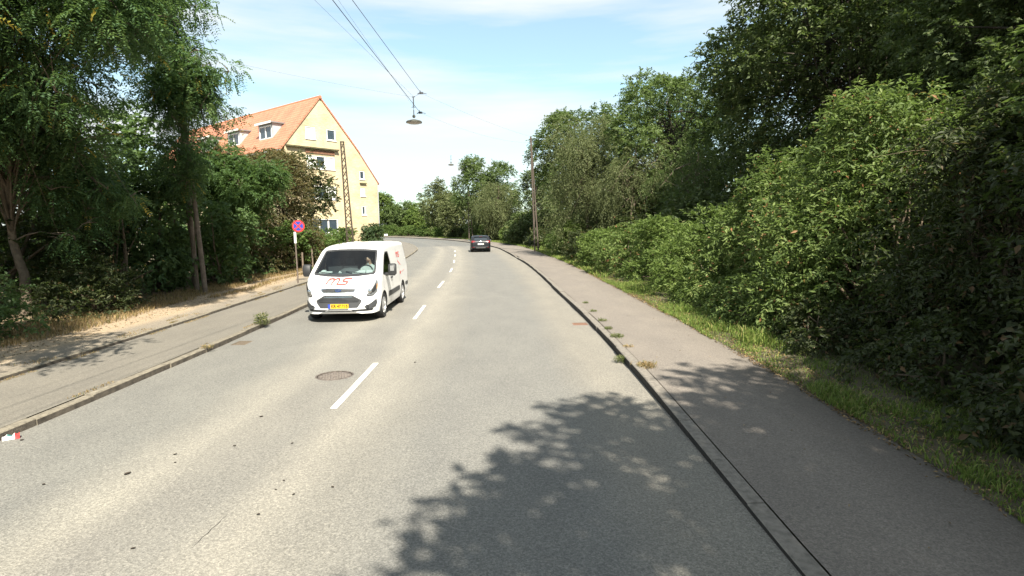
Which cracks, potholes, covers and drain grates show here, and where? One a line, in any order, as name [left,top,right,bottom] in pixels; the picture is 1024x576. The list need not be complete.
manhole cover [315,371,354,381]
